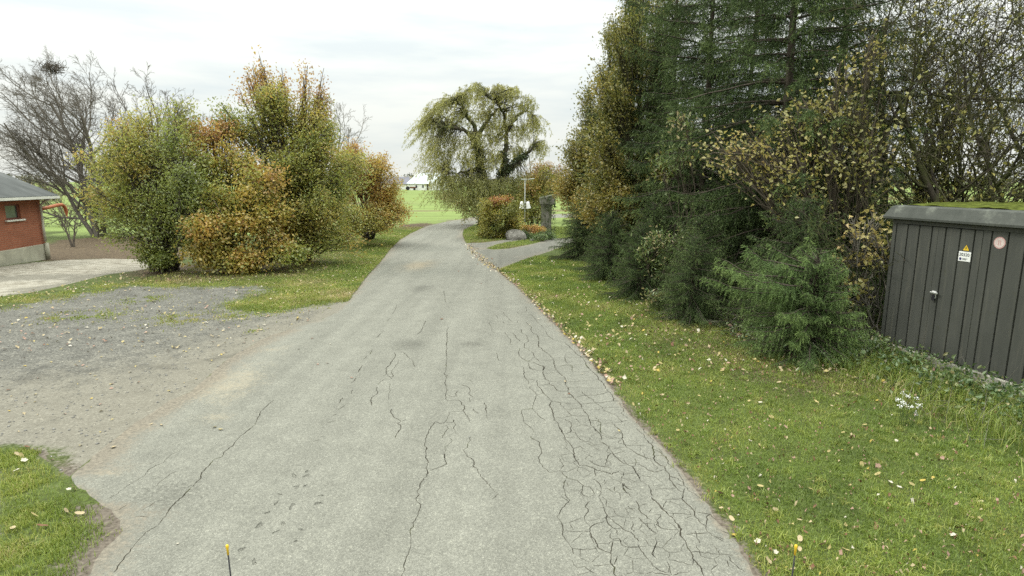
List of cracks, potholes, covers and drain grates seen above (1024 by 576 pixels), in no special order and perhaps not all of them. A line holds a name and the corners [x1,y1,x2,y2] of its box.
crack [401,329,498,576]
crack [370,352,415,438]
crack [489,308,745,576]
crack [110,400,274,572]
